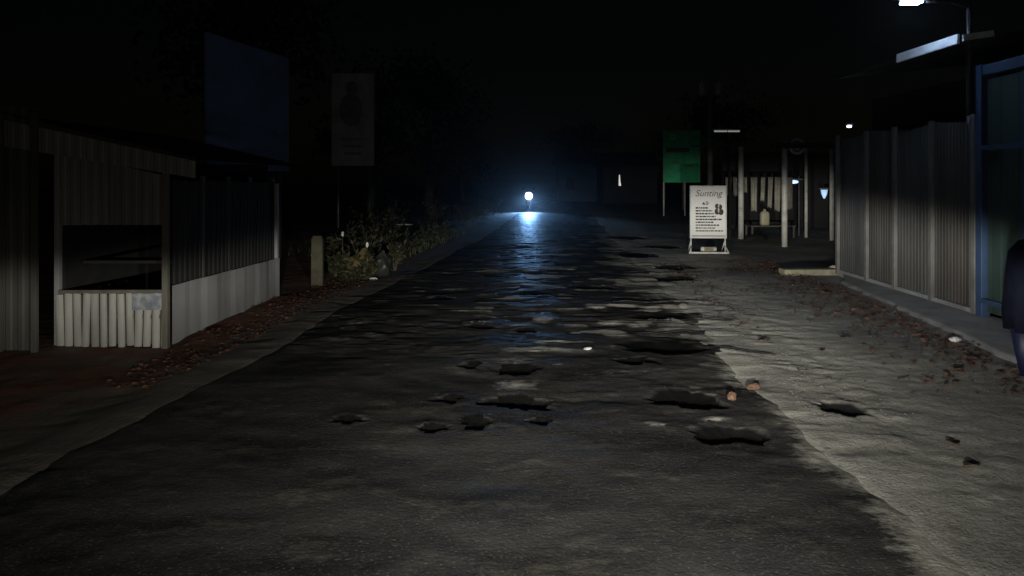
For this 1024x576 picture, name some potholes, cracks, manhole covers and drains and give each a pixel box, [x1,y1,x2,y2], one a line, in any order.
pothole [608,339,722,357]
pothole [604,354,671,367]
pothole [407,419,466,436]
pothole [320,411,378,428]
pothole [634,385,741,413]
pothole [476,361,553,378]
pothole [445,411,504,434]
pothole [643,263,707,271]
pothole [419,391,481,408]
pothole [455,390,563,414]
pothole [514,412,564,429]
pothole [448,359,503,372]
